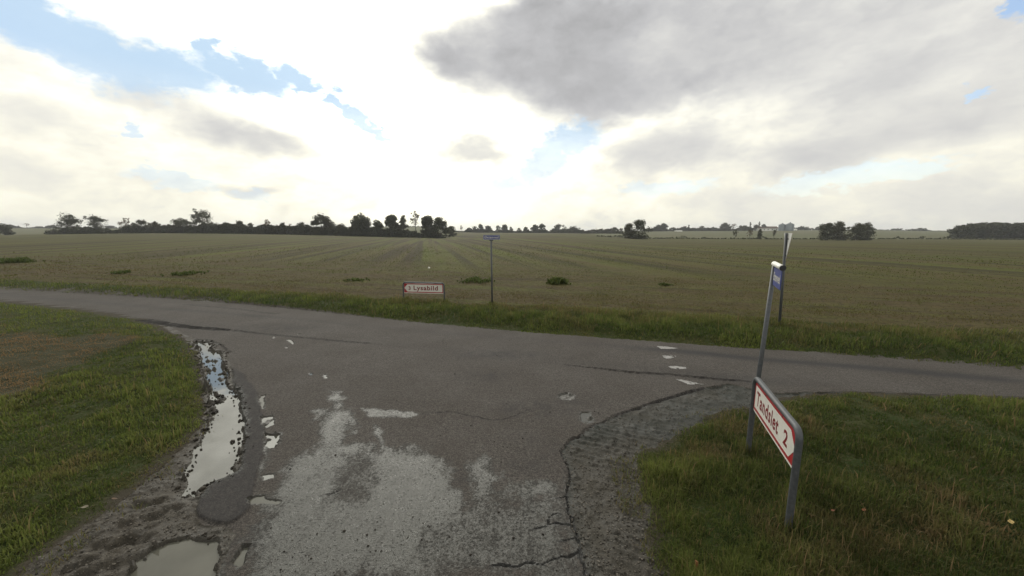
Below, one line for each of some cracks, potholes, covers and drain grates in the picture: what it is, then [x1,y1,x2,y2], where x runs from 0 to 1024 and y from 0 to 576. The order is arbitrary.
pothole [125,535,223,576]
crack [419,409,531,422]
crack [490,364,751,576]
pothole [557,392,576,400]
pothole [178,340,248,498]
